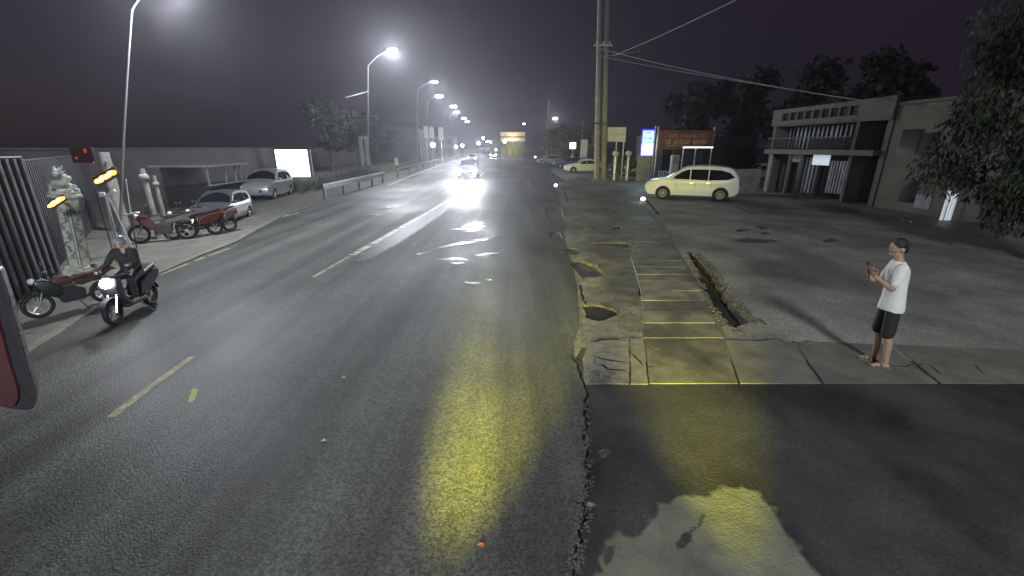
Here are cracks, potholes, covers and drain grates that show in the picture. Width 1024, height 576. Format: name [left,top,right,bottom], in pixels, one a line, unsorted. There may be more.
pothole [569,260,604,279]
pothole [583,305,618,321]
crack [571,338,643,392]
